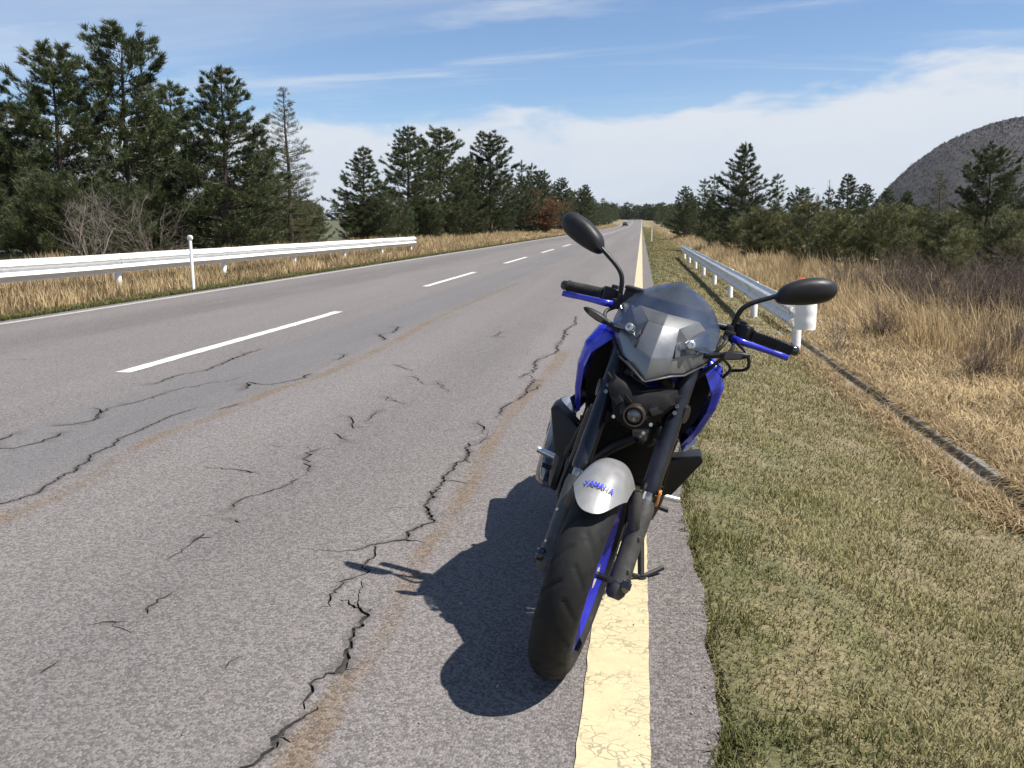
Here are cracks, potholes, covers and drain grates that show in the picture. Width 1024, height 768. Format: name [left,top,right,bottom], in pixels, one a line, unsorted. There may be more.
crack [0,349,309,504]
crack [240,316,577,768]
crack [206,396,401,523]
